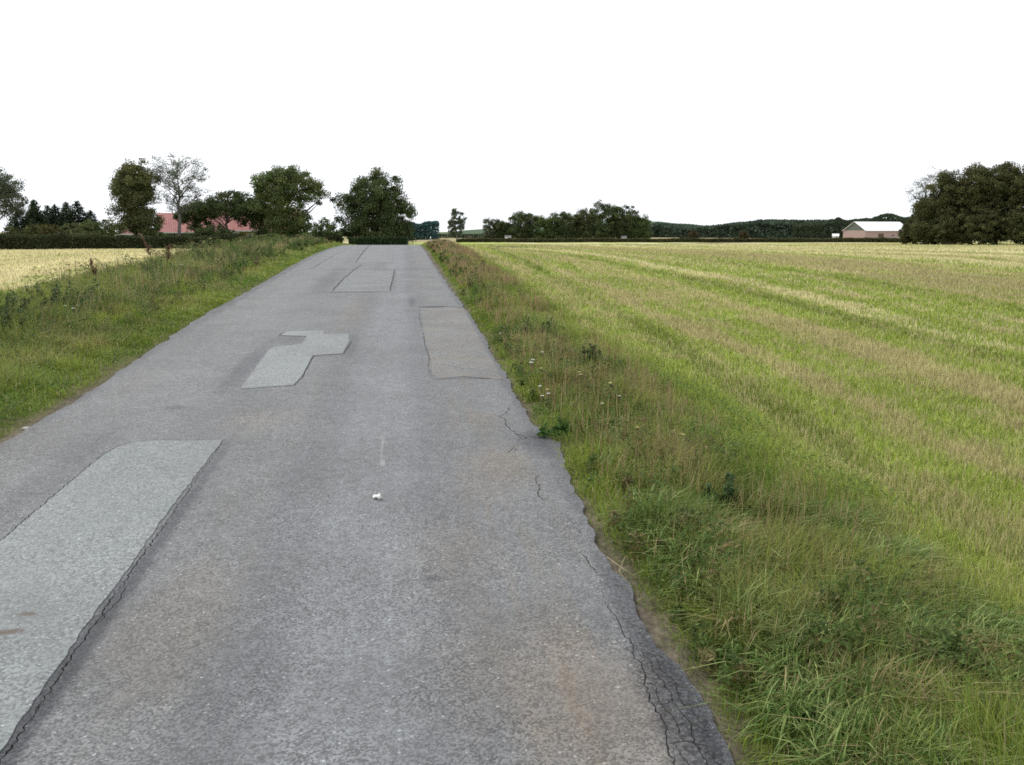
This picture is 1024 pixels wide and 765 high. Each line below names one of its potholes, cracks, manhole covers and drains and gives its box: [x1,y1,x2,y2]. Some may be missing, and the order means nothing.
crack [500,408,548,453]
crack [602,592,721,765]
